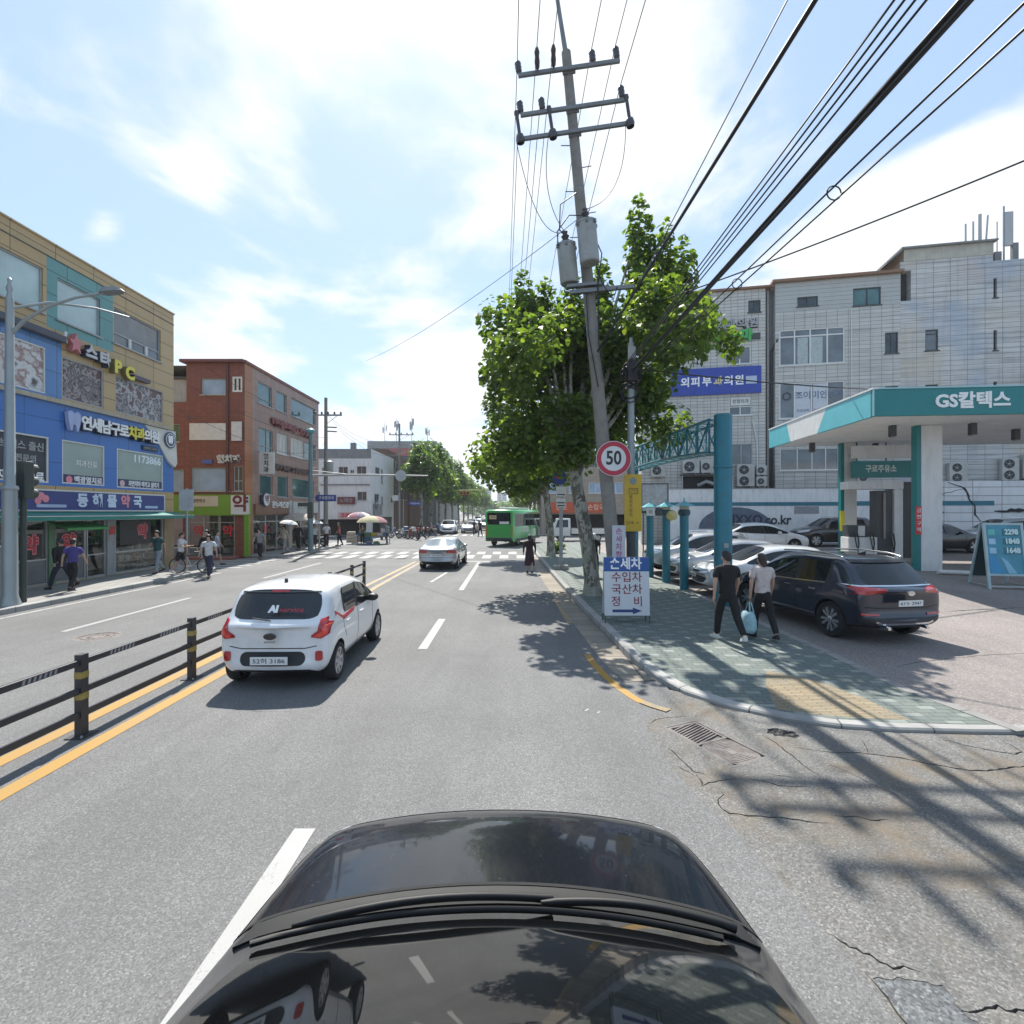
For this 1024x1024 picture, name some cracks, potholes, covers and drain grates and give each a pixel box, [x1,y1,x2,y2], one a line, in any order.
crack [796,739,1024,798]
pothole [767,728,800,738]
crack [670,749,888,823]
drain grate [663,720,770,767]
manhole cover [72,632,122,641]
crack [867,975,907,1024]
crack [961,1004,1024,1017]
